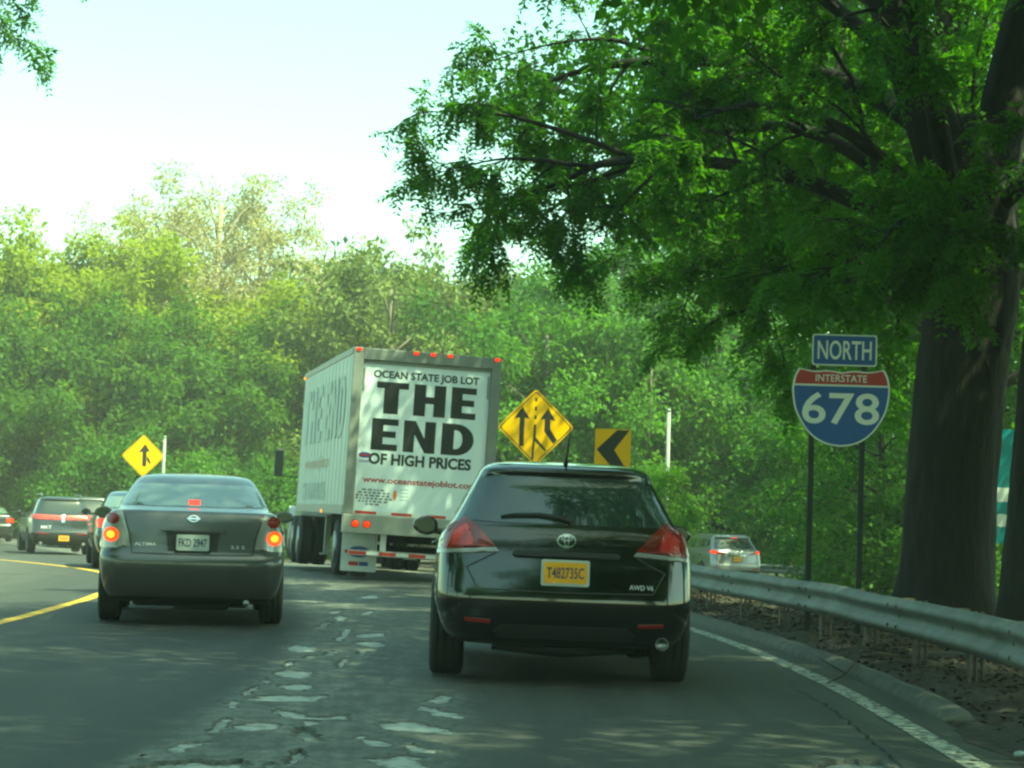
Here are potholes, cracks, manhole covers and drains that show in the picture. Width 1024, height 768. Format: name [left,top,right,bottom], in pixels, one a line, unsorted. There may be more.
pothole [271,668,317,678]
pothole [230,722,284,731]
pothole [241,694,330,702]
pothole [415,704,467,719]
pothole [285,644,322,652]
pothole [165,741,215,753]
pothole [367,720,459,734]
pothole [269,708,352,720]
pothole [352,733,396,747]
pothole [204,717,234,735]
